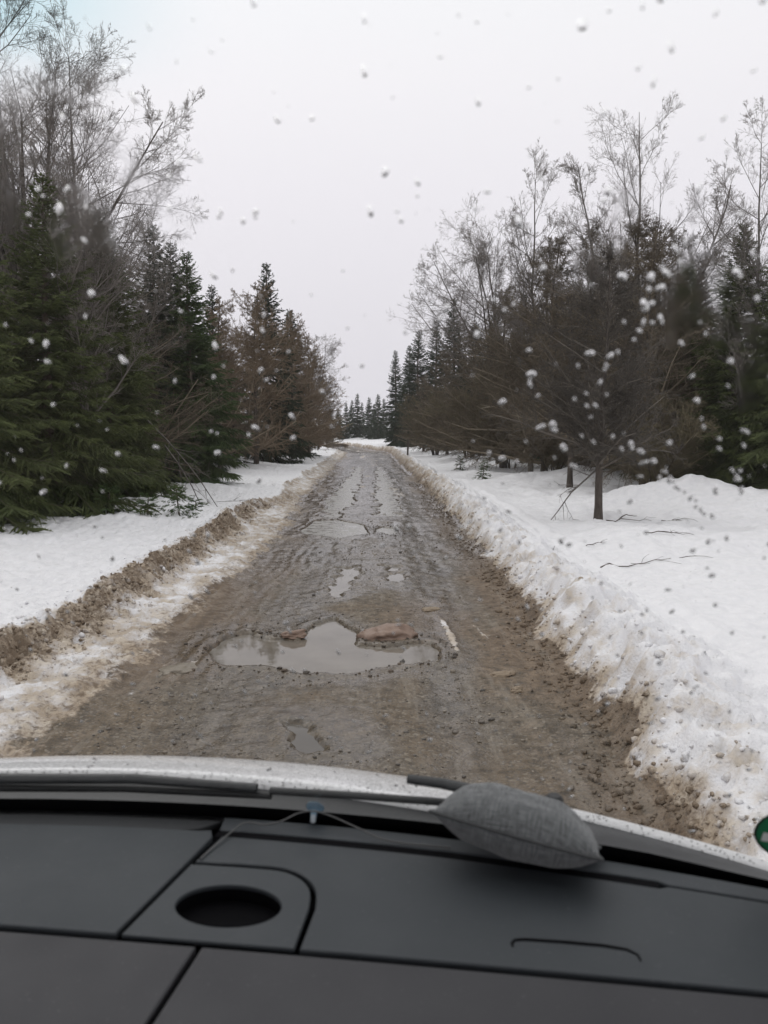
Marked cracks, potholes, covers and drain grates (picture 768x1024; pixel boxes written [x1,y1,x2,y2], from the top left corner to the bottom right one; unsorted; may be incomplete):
pothole [377,563,410,583]
pothole [202,616,449,674]
pothole [280,716,334,756]
pothole [323,564,370,598]
pothole [298,519,370,538]
